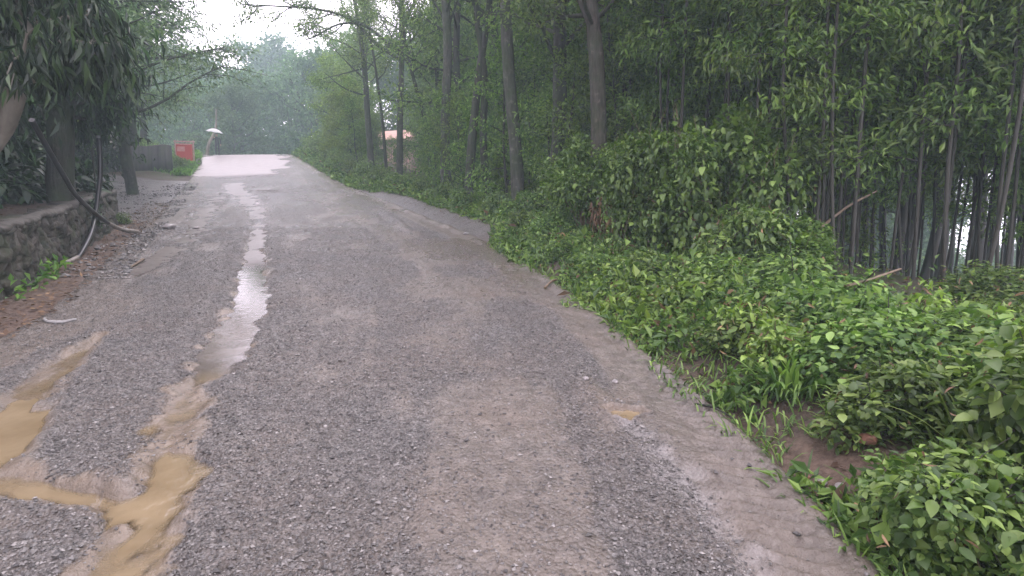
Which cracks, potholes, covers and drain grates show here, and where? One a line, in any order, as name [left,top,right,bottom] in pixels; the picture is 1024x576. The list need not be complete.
pothole [0,392,71,480]
pothole [597,401,656,424]
